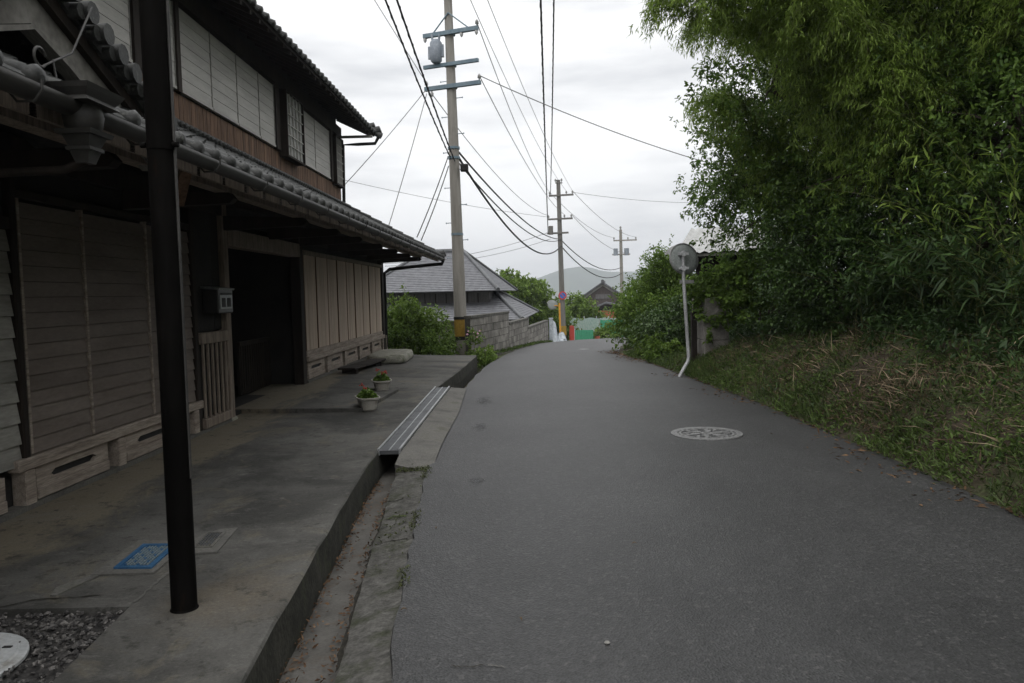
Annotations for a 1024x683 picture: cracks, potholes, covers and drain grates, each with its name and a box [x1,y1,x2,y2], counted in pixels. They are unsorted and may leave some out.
manhole cover [671,427,743,440]
manhole cover [0,632,30,679]
